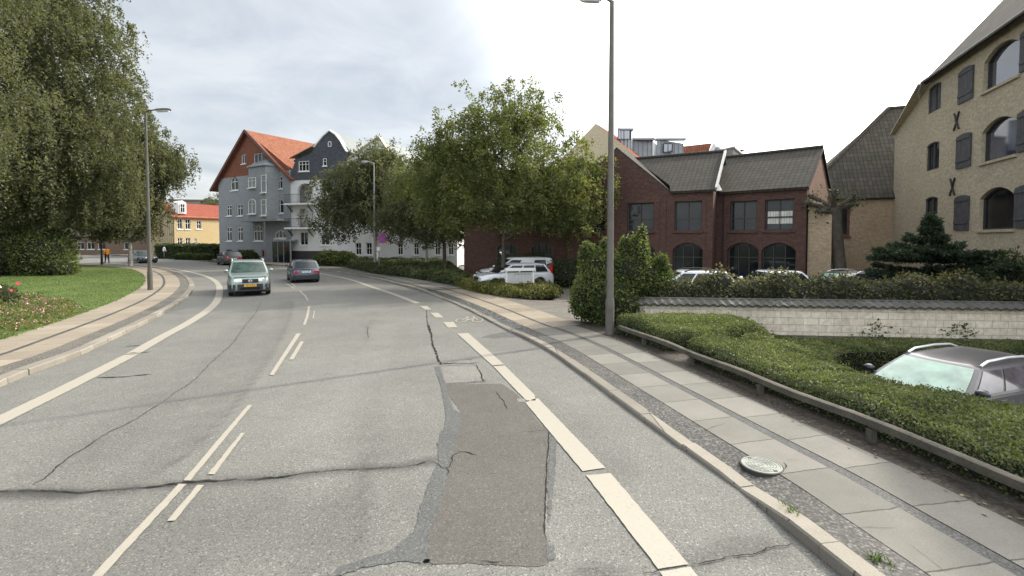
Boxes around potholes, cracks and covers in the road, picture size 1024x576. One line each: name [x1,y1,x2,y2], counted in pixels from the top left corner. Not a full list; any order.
crack [426,310,507,408]
manhole cover [739,456,784,477]
crack [4,303,476,493]
